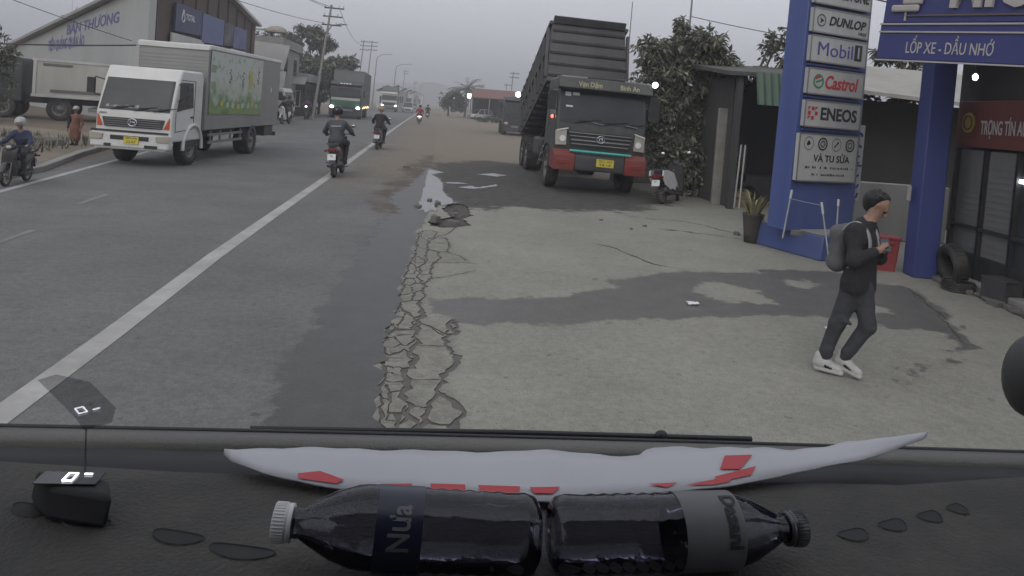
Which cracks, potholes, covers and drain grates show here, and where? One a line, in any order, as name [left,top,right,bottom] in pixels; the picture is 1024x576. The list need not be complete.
crack [378,228,472,429]
pothole [428,203,473,228]
crack [616,214,738,239]
crack [593,243,684,270]
